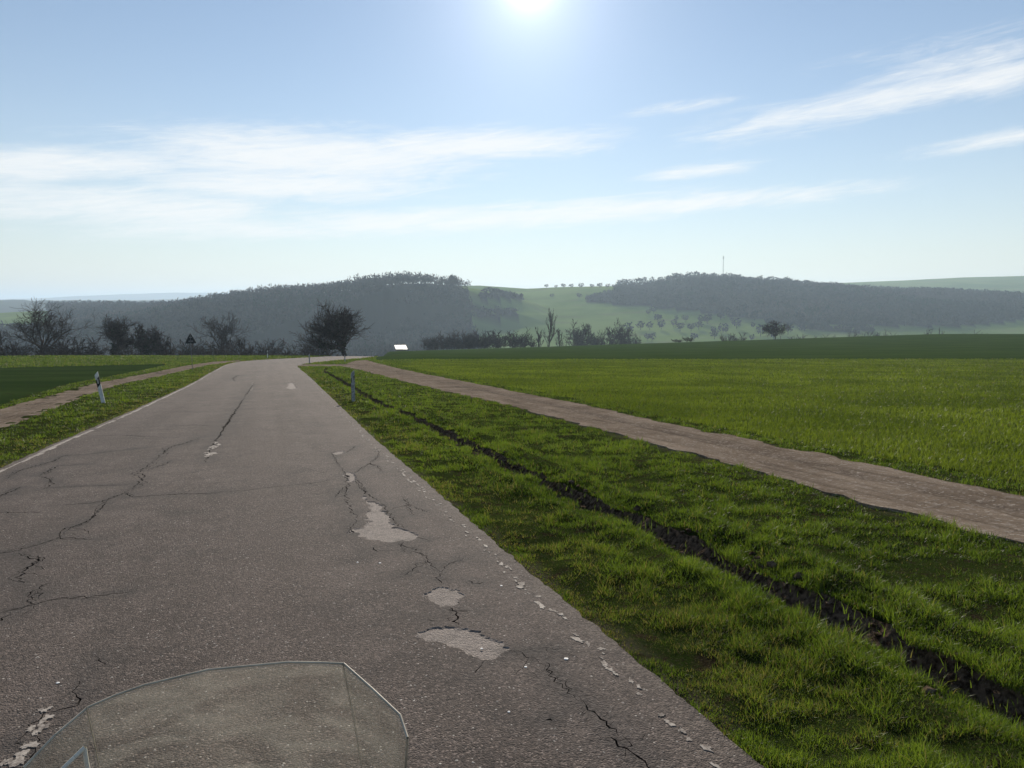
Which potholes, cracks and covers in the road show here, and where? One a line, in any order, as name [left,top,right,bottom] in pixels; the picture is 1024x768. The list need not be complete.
crack [475,647,649,768]
crack [250,447,463,583]
crack [0,435,222,554]
pothole [415,626,510,660]
pothole [347,501,419,542]
crack [0,554,126,621]
crack [11,655,106,768]
pothole [423,587,465,607]
